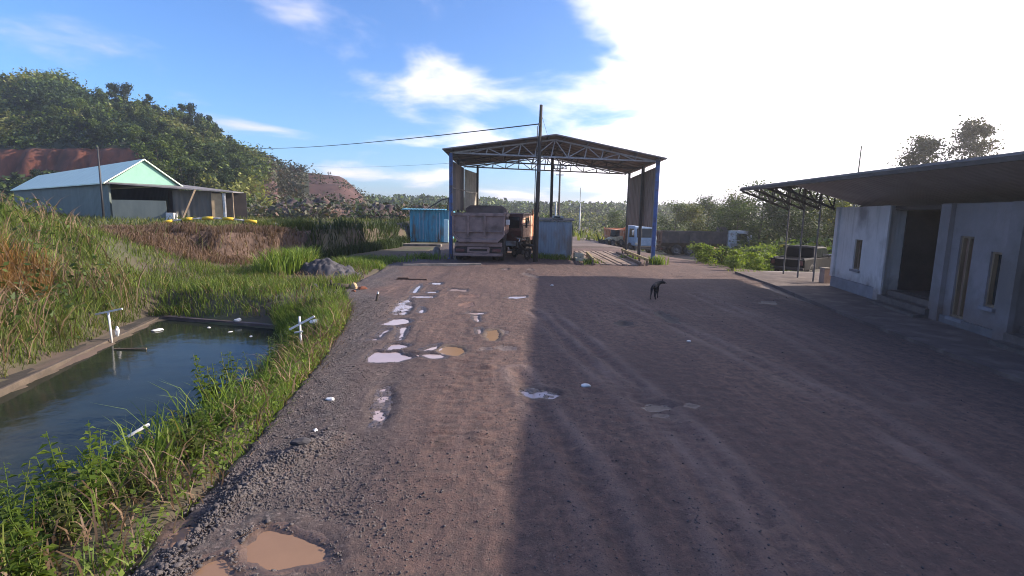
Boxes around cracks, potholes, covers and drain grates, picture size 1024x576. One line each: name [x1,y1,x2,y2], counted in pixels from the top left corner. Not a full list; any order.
pothole [435,344,471,356]
pothole [389,298,413,315]
pothole [368,386,393,428]
pothole [417,343,444,351]
pothole [641,404,672,412]
pothole [230,522,342,576]
pothole [481,328,504,341]
pothole [416,350,451,360]
pothole [182,547,259,576]
pothole [376,318,414,326]
pothole [361,349,419,364]
pothole [518,388,560,399]
